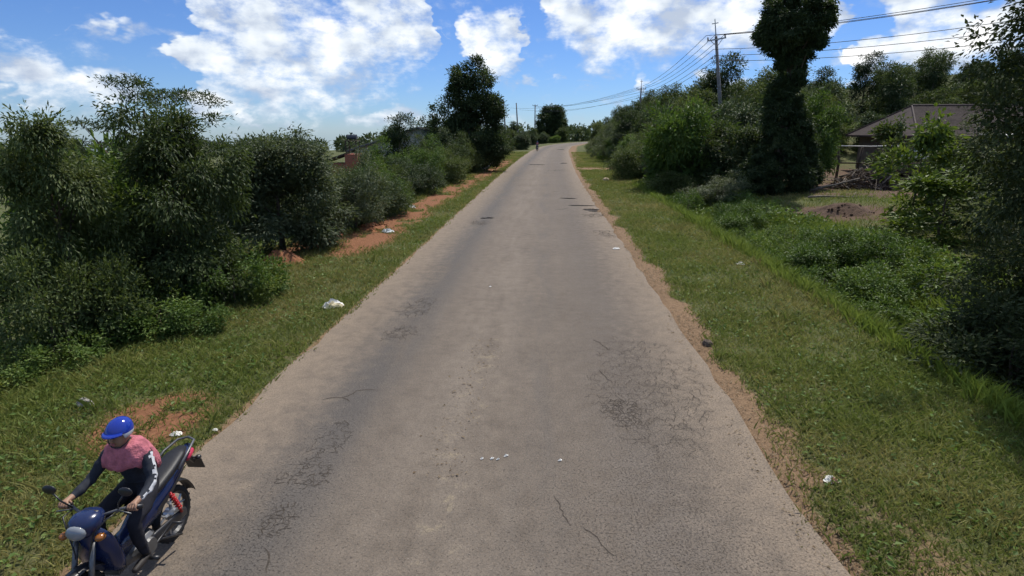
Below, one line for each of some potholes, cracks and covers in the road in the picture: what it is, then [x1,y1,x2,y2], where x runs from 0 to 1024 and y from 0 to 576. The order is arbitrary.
crack [554,496,613,555]
crack [274,420,354,489]
crack [585,336,712,458]
